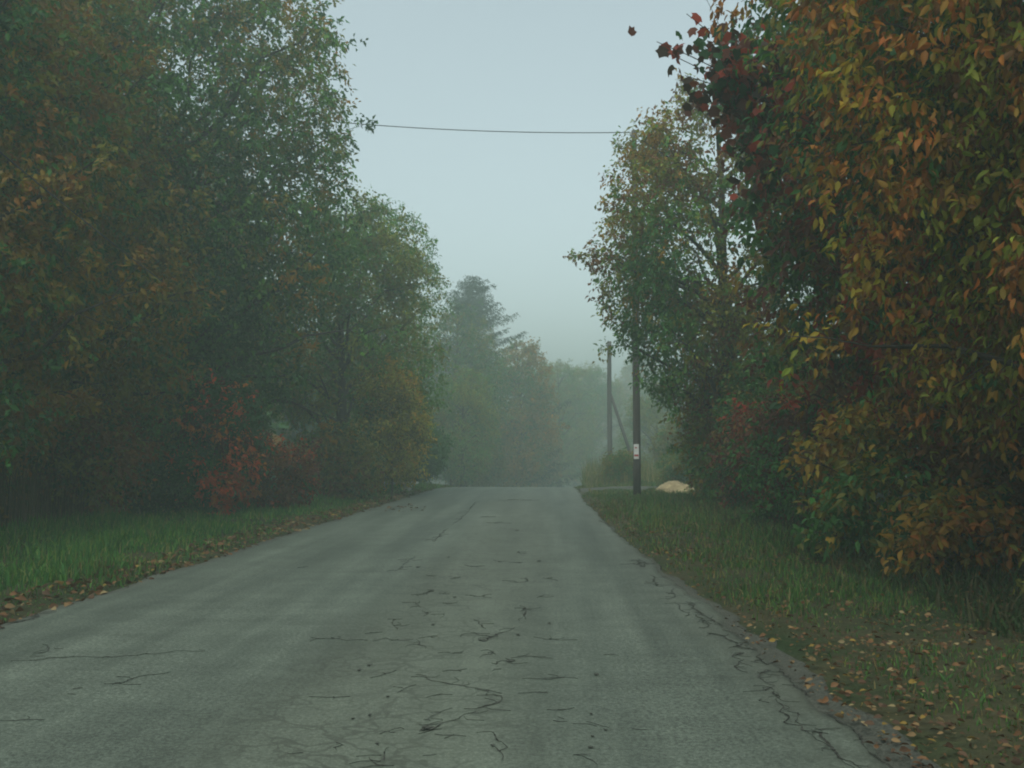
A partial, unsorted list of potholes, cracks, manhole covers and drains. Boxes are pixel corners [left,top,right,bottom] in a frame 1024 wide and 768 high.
crack [333,551,609,768]
crack [637,559,893,768]
crack [14,644,200,661]
crack [109,672,168,685]
crack [434,499,518,541]
